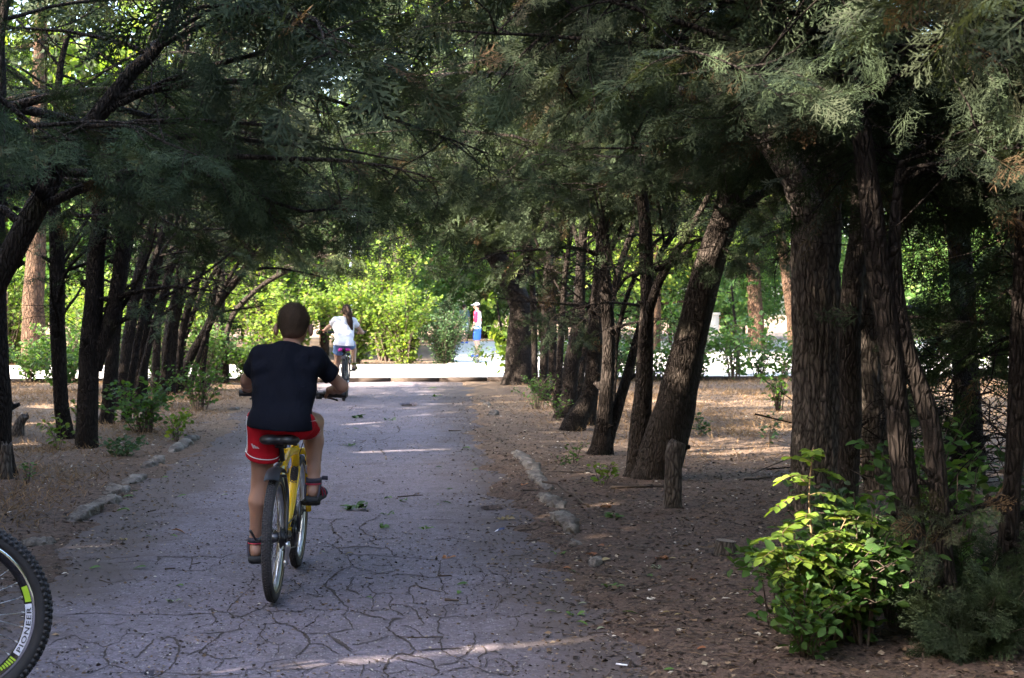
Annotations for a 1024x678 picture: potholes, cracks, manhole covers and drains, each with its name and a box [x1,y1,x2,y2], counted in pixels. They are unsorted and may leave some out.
crack [48,518,515,678]
